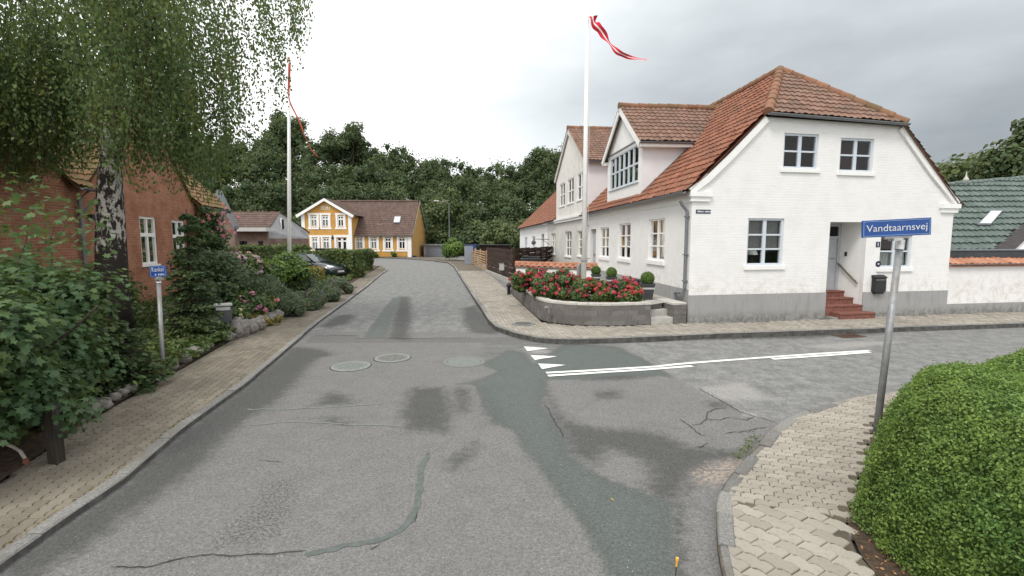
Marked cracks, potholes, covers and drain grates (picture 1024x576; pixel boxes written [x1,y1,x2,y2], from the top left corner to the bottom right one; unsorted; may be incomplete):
manhole cover [373,353,411,363]
manhole cover [330,361,372,372]
crack [679,388,770,447]
crack [109,452,431,568]
manhole cover [442,356,486,368]
